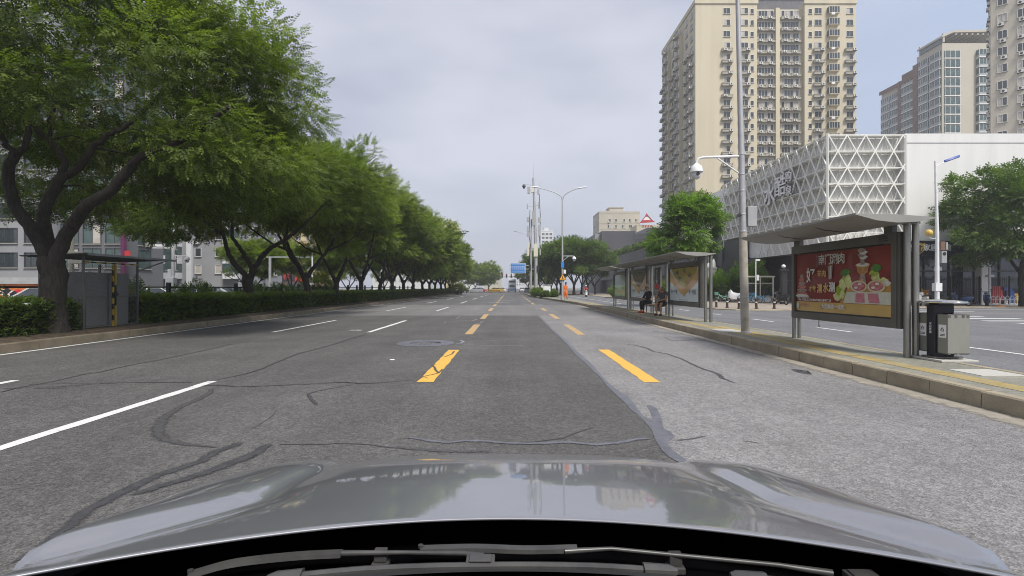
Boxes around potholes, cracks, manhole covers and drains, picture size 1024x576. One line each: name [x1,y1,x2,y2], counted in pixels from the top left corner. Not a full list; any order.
crack [1,333,455,392]
